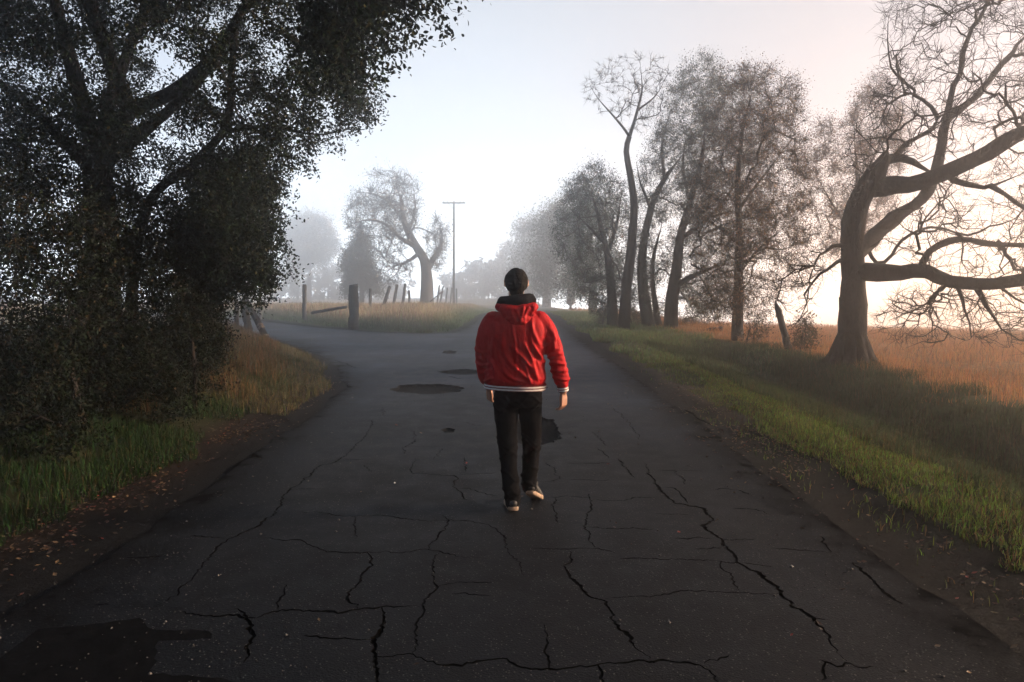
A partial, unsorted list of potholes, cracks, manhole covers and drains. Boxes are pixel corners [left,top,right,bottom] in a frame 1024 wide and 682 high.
pothole [517,417,561,445]
pothole [390,384,465,394]
crack [154,411,902,682]
